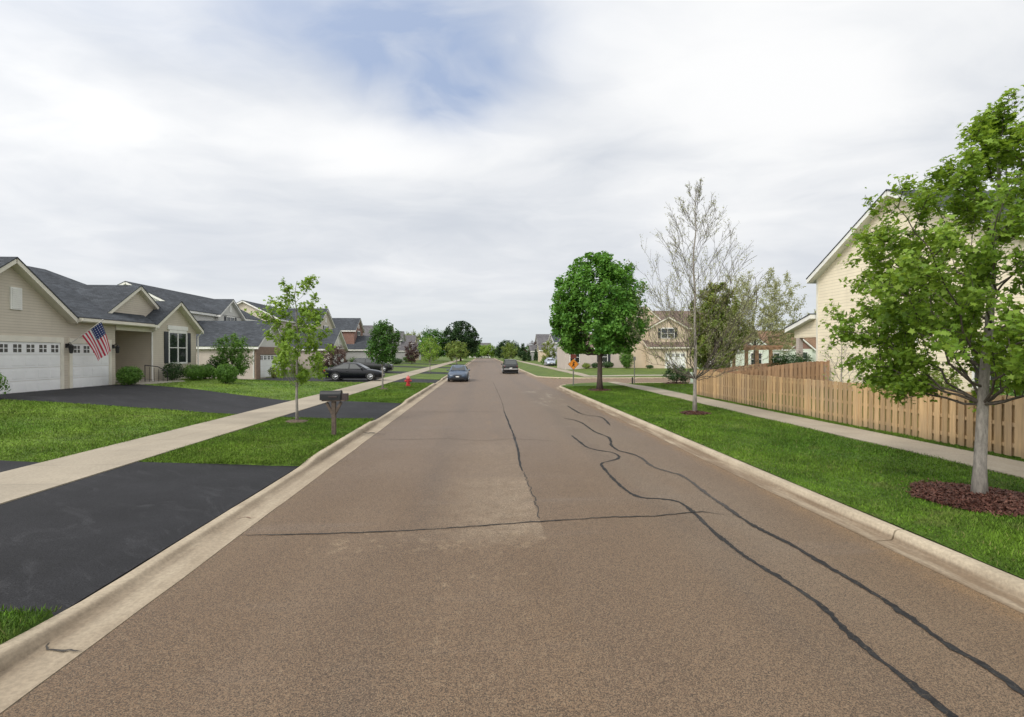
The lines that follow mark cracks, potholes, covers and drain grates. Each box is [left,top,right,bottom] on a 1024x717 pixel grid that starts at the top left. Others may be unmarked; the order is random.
crack [46,642,79,652]
